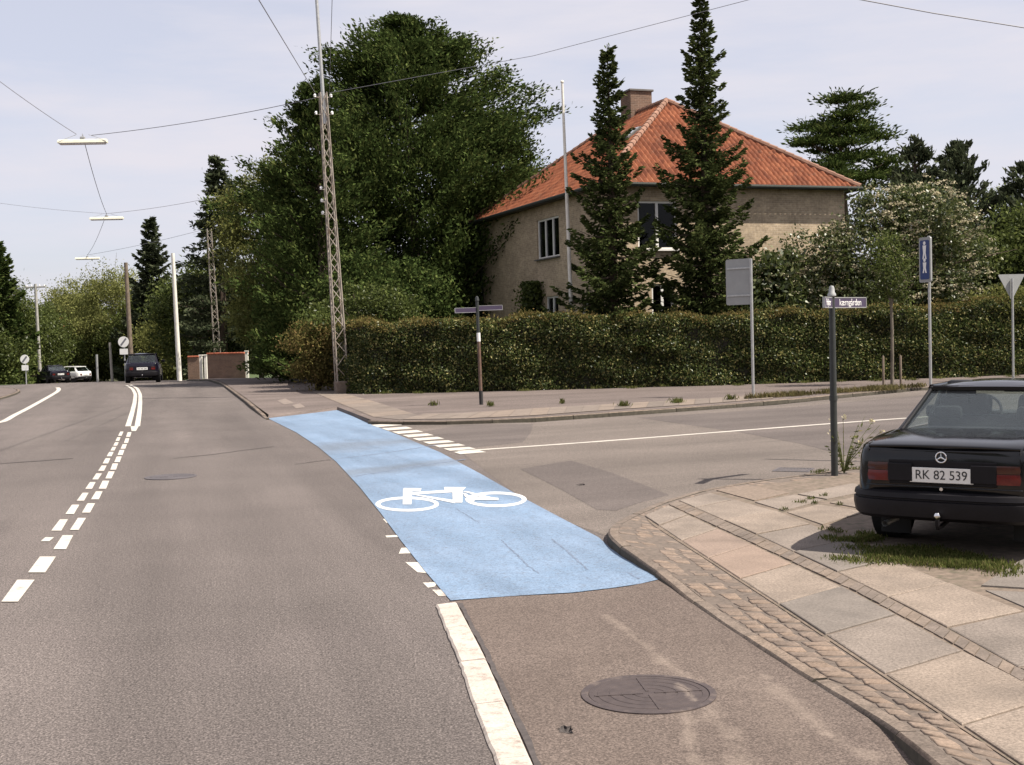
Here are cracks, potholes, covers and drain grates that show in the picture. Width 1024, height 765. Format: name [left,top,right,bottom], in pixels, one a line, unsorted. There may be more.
manhole cover [581,674,717,715]
crack [501,539,588,574]
